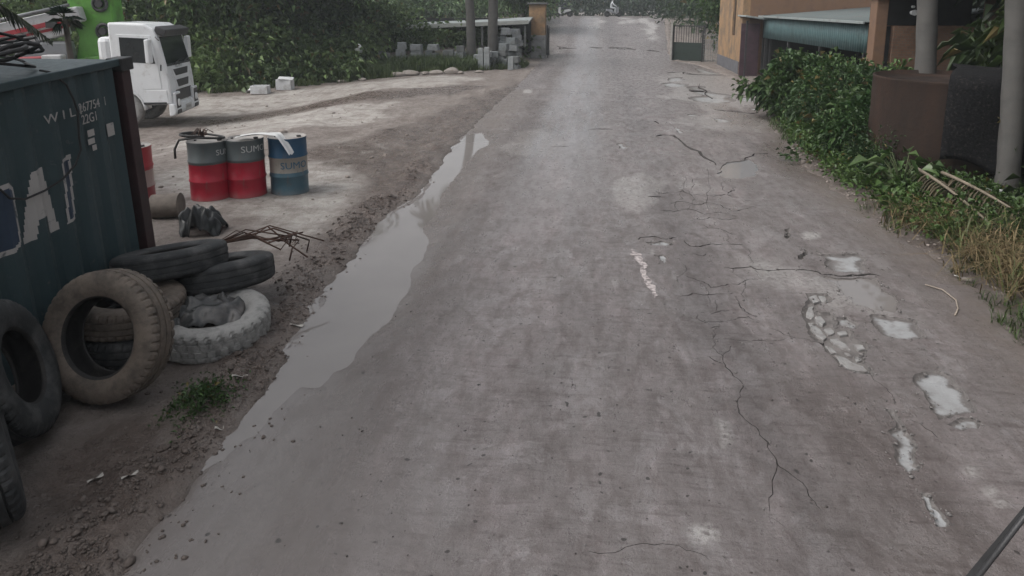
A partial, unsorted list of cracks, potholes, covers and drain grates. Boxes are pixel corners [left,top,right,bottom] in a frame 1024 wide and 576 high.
pothole [801,293,874,374]
pothole [885,408,922,475]
pothole [947,417,981,431]
pothole [920,492,949,527]
crack [667,72,758,114]
crack [589,543,705,556]
pothole [912,370,977,420]
crack [638,121,879,528]
pothole [815,252,870,273]
pothole [869,314,925,340]
